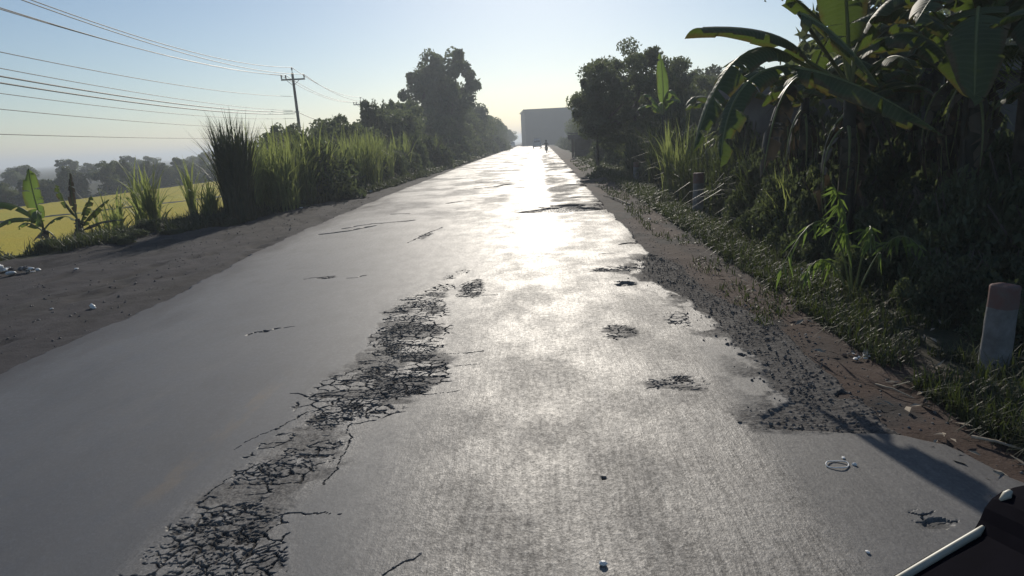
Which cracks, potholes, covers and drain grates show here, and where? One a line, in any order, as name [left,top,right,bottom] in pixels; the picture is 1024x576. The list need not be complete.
pothole [898,508,971,537]
crack [115,267,498,576]
crack [316,213,444,243]
